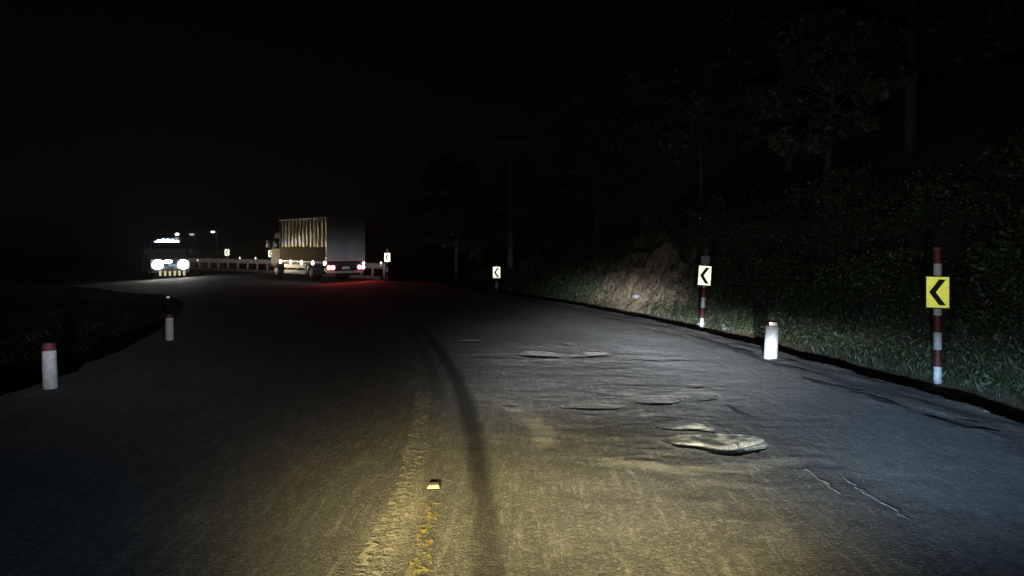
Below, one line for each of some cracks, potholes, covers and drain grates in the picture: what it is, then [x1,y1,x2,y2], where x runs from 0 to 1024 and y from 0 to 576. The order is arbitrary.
pothole [629,398,681,406]
pothole [662,434,770,457]
crack [805,469,911,521]
pothole [657,422,718,436]
pothole [560,403,626,411]
pothole [567,350,613,359]
